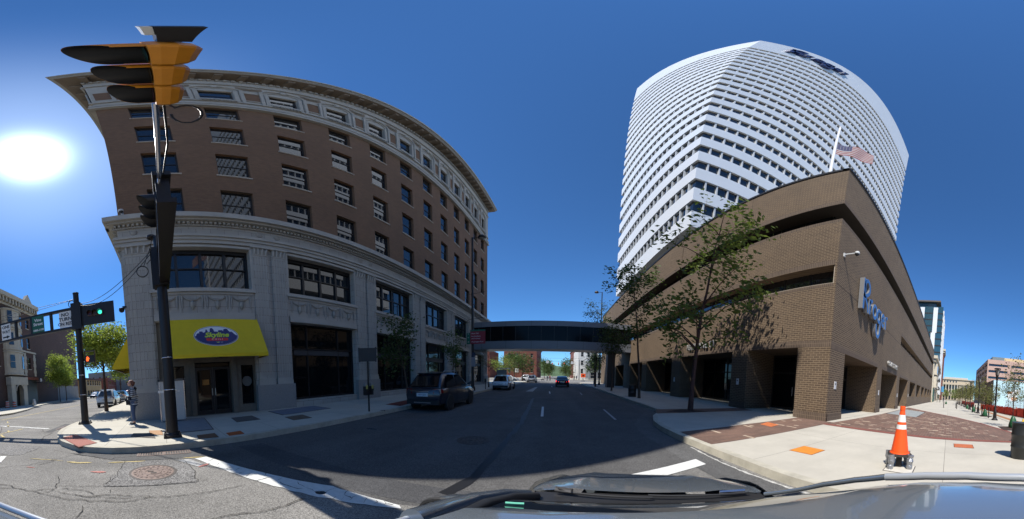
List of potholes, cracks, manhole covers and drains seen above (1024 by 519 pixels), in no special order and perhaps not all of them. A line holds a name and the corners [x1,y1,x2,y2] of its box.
manhole cover [456,436,490,445]
manhole cover [129,465,177,480]
crack [1,452,393,519]
